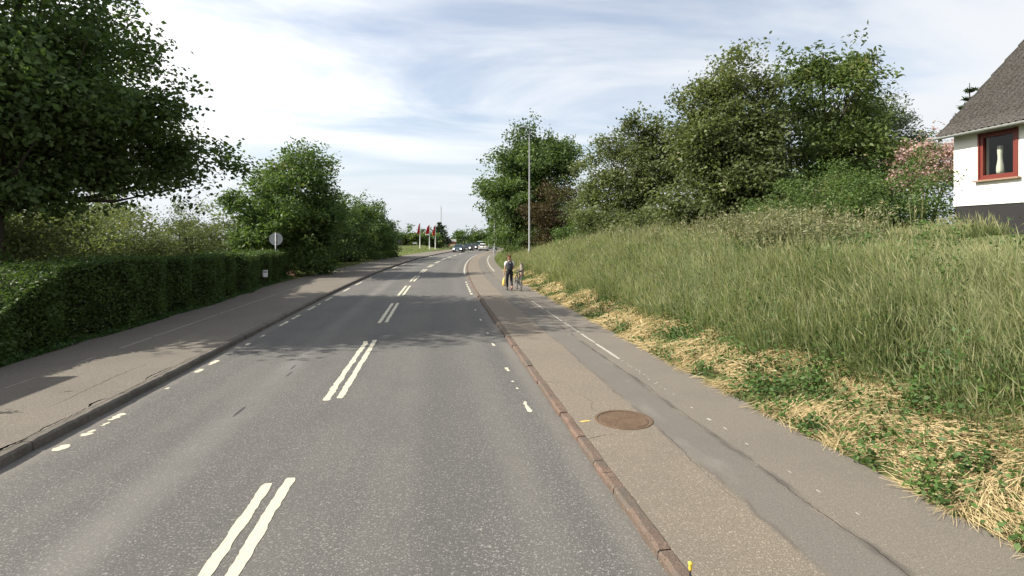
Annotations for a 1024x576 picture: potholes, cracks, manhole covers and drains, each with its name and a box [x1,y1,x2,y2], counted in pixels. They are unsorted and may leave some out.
manhole cover [594,410,654,430]
